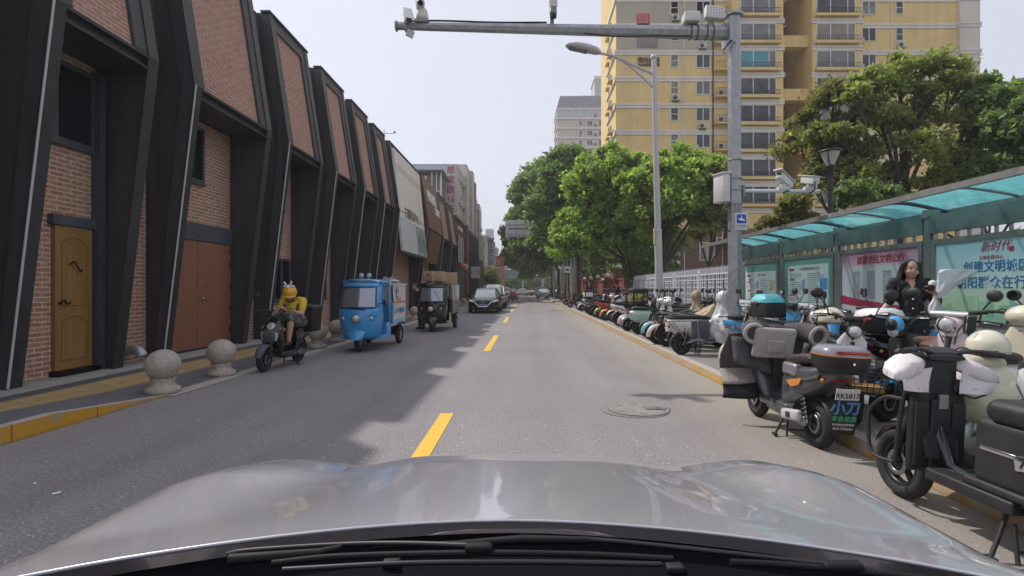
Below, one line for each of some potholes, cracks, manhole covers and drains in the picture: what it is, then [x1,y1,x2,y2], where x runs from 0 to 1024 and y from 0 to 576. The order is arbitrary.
manhole cover [599,402,671,418]
